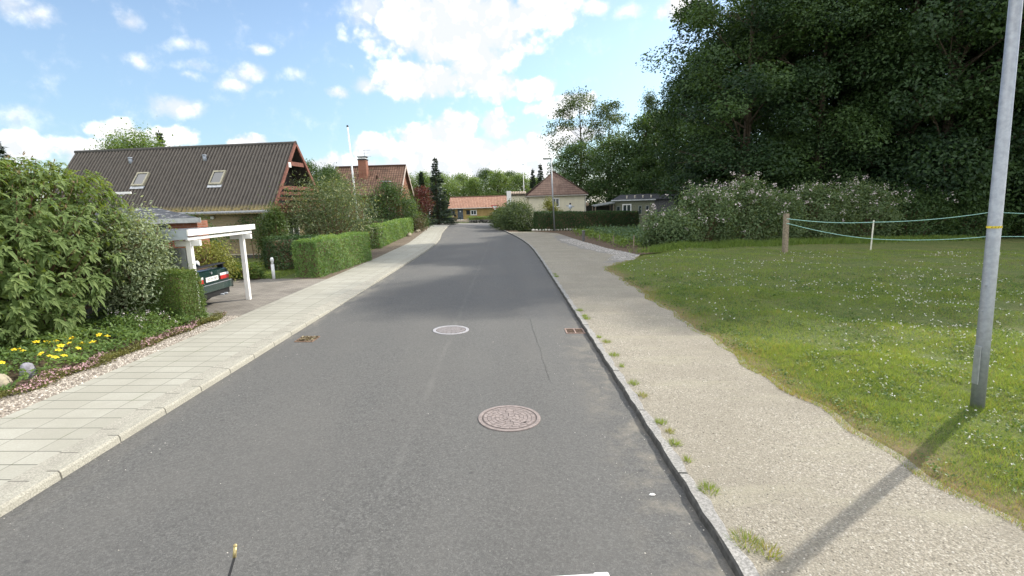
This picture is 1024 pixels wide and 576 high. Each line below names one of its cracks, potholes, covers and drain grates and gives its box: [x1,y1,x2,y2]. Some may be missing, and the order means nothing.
manhole cover [433,325,469,335]
manhole cover [478,405,541,432]
